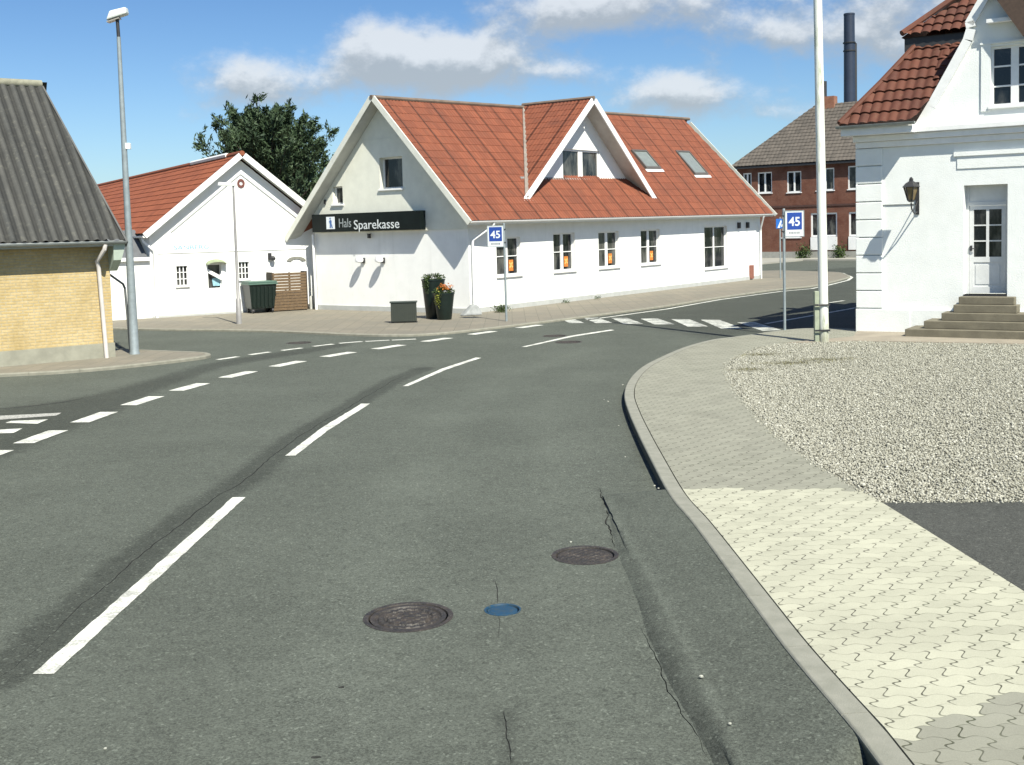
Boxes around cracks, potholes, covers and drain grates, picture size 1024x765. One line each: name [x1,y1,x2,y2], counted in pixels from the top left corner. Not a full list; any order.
manhole cover [363,602,453,633]
manhole cover [551,546,619,565]
manhole cover [484,603,521,616]
crack [599,488,614,544]
crack [503,712,511,760]
